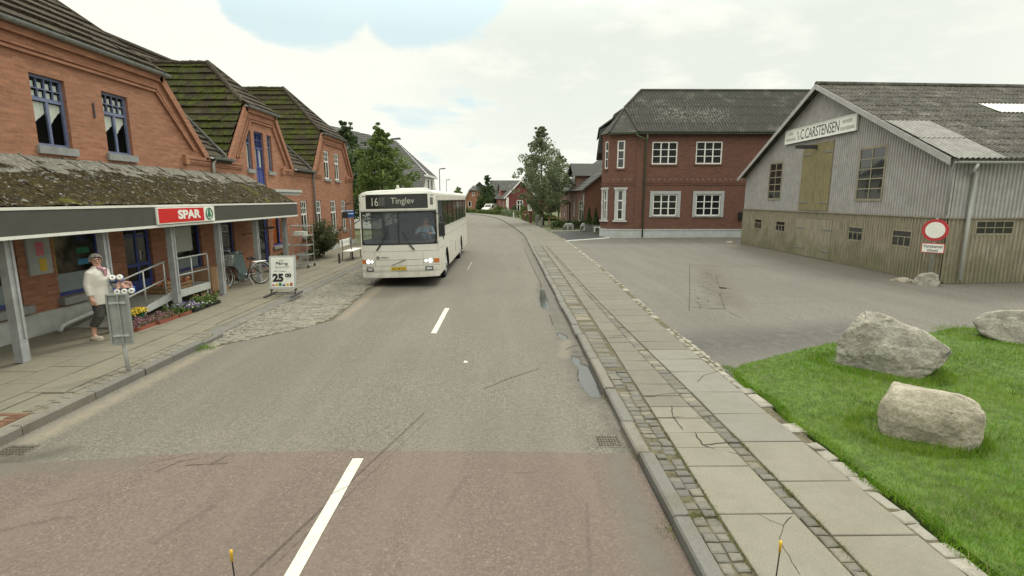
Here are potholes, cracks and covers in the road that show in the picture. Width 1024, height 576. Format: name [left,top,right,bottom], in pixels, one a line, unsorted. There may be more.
drain grate [592,435,625,448]
crack [655,372,739,455]
drain grate [0,445,41,457]
